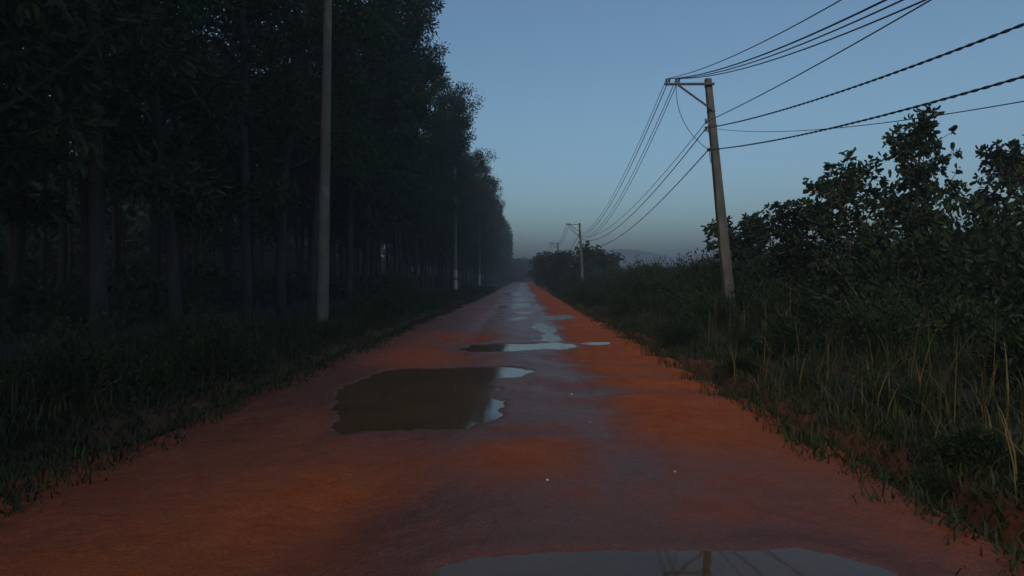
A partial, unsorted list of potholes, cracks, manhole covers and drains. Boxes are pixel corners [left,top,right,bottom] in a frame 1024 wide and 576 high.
pothole [326,365,543,435]
pothole [458,342,580,352]
pothole [422,538,921,576]
